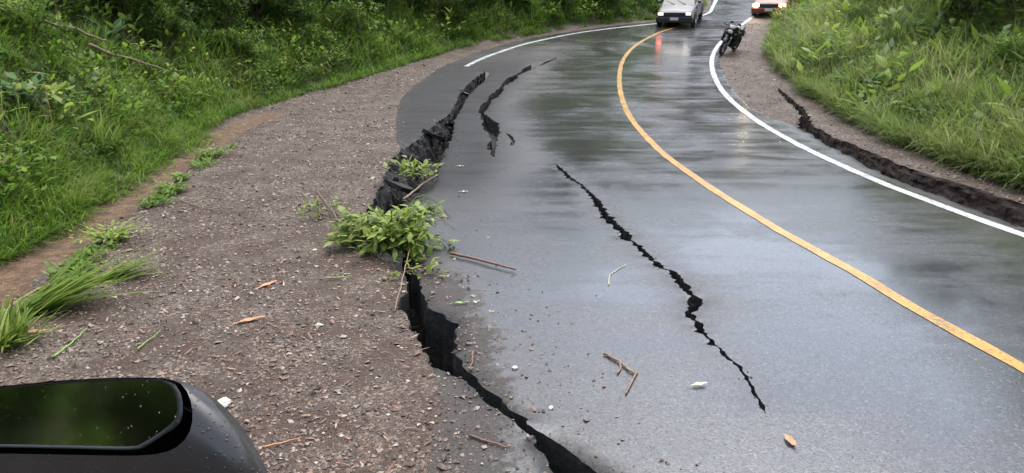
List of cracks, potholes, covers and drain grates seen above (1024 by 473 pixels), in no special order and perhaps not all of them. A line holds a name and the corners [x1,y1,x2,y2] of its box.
crack [356,58,1024,473]
